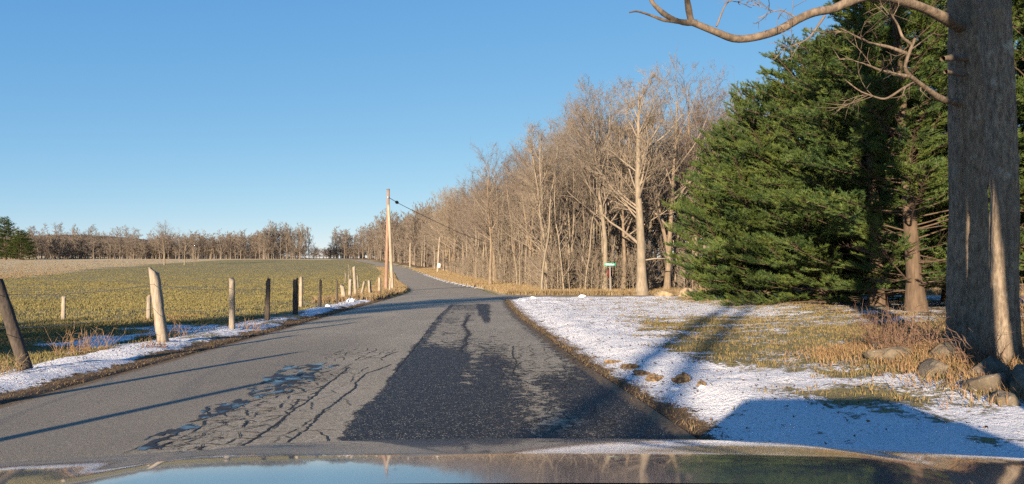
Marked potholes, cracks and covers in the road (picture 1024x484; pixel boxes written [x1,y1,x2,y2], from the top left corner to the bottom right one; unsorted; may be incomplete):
crack [124,348,398,453]
crack [459,315,471,352]
